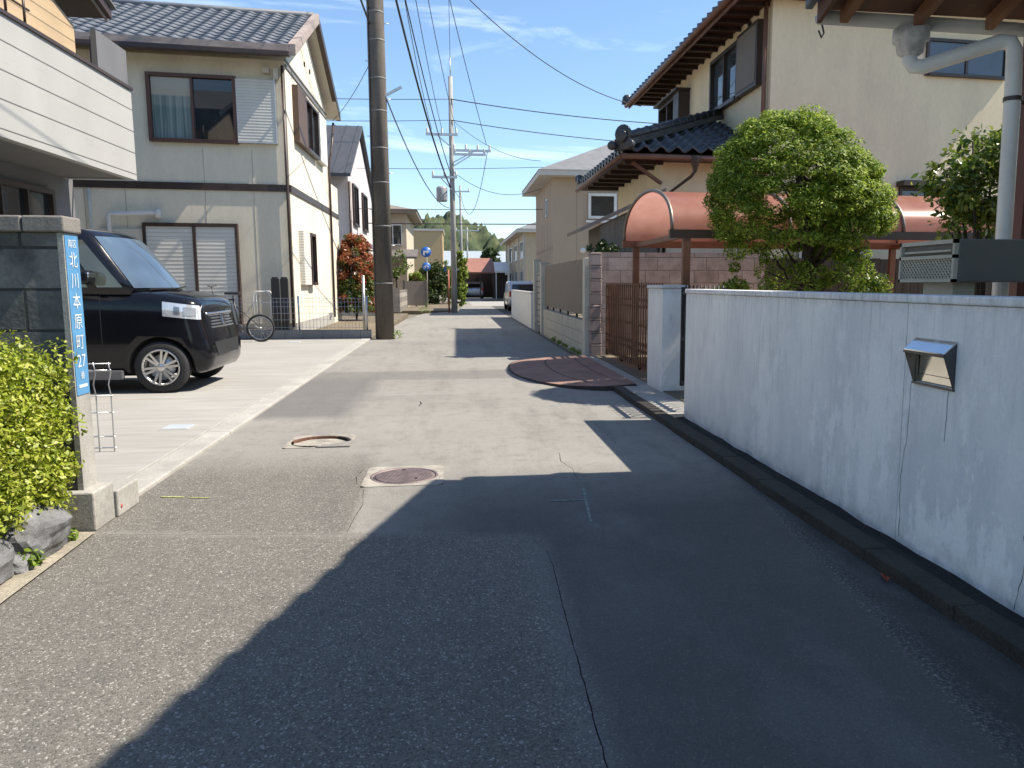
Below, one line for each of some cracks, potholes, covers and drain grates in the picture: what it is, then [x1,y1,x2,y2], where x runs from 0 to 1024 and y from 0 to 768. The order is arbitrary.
manhole cover [361,465,444,488]
crack [216,534,608,768]
manhole cover [282,434,357,449]
